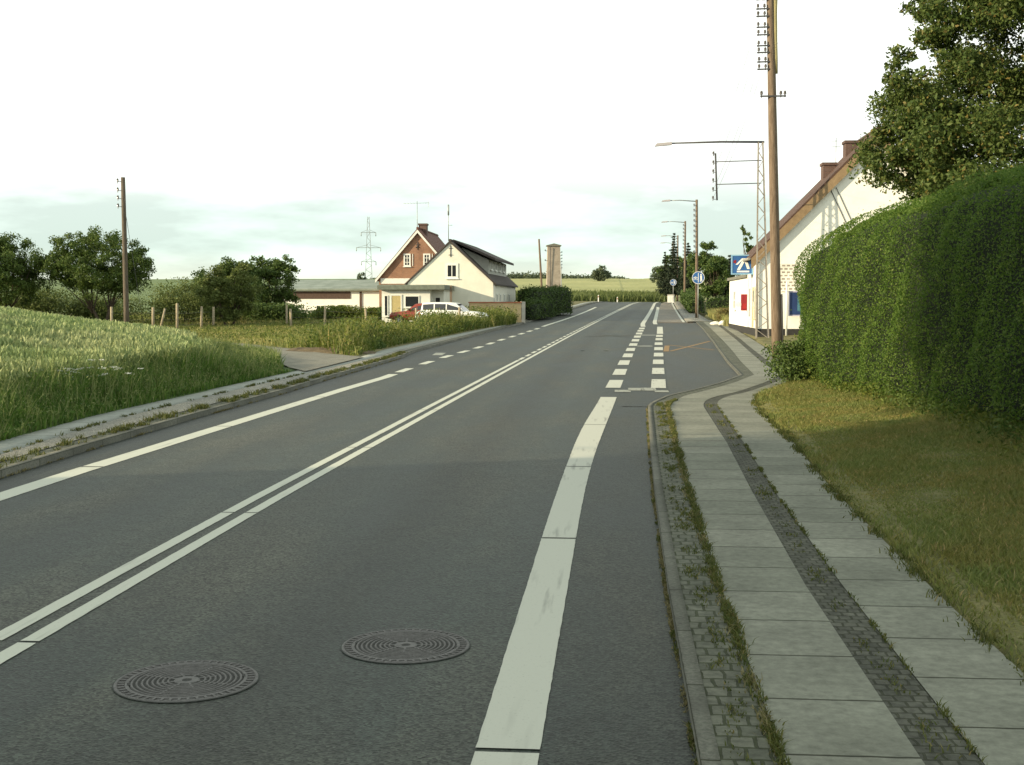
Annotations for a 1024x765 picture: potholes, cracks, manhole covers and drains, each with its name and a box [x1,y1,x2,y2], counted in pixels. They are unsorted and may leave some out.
manhole cover [112,660,260,703]
manhole cover [340,628,471,664]
